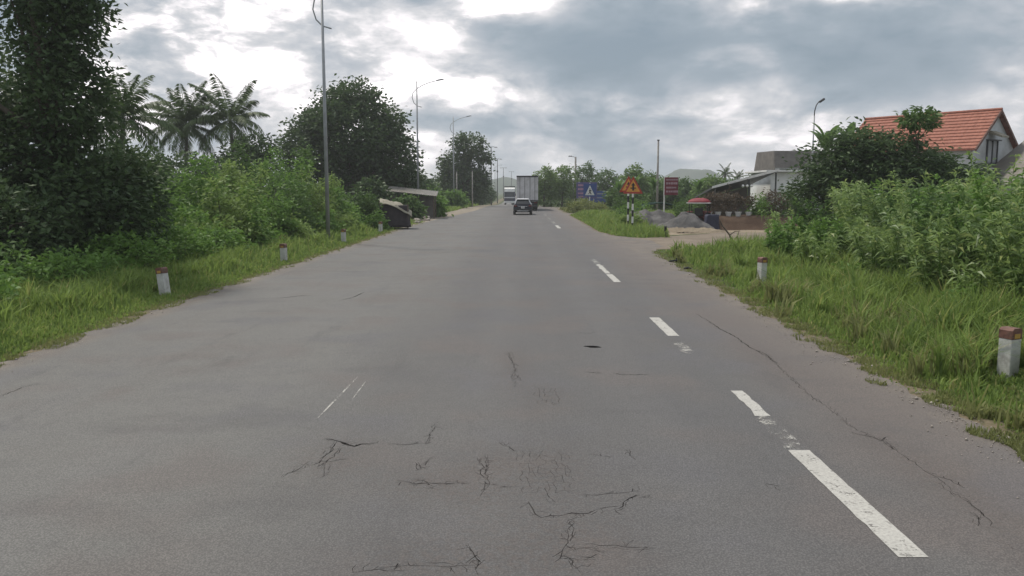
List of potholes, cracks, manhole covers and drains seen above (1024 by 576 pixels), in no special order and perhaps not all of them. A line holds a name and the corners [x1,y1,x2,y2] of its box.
crack [281,422,653,572]
crack [697,314,1007,532]
